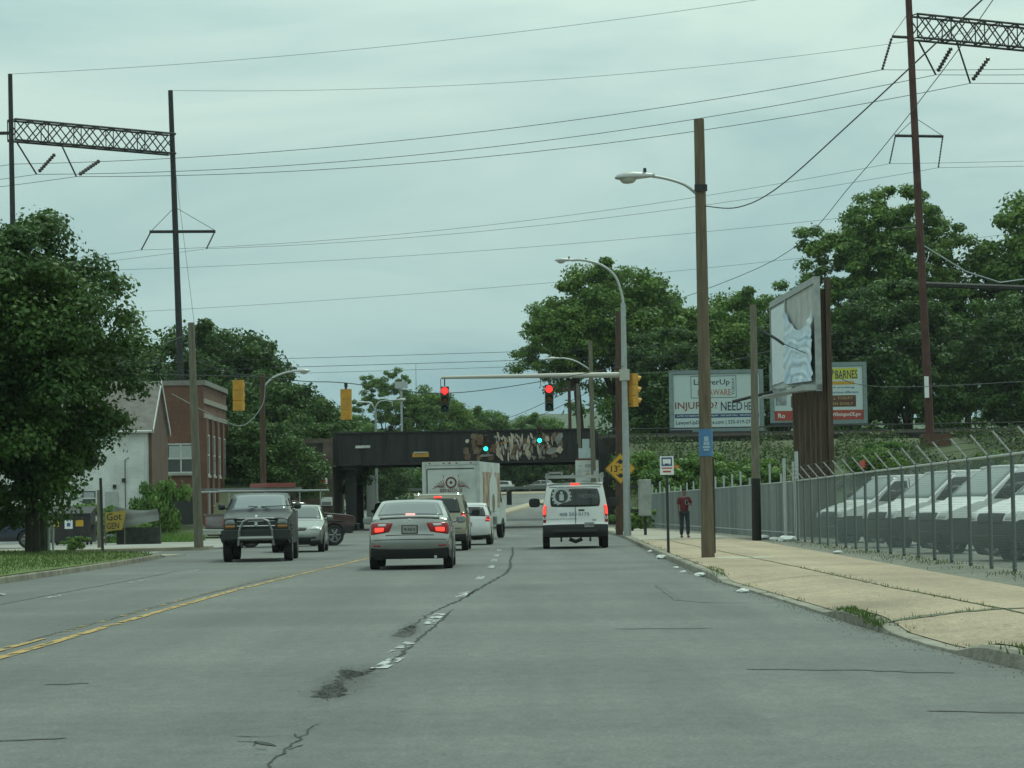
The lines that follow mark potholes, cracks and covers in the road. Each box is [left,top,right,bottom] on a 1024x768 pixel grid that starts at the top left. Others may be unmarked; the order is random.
crack [250,721,323,768]
